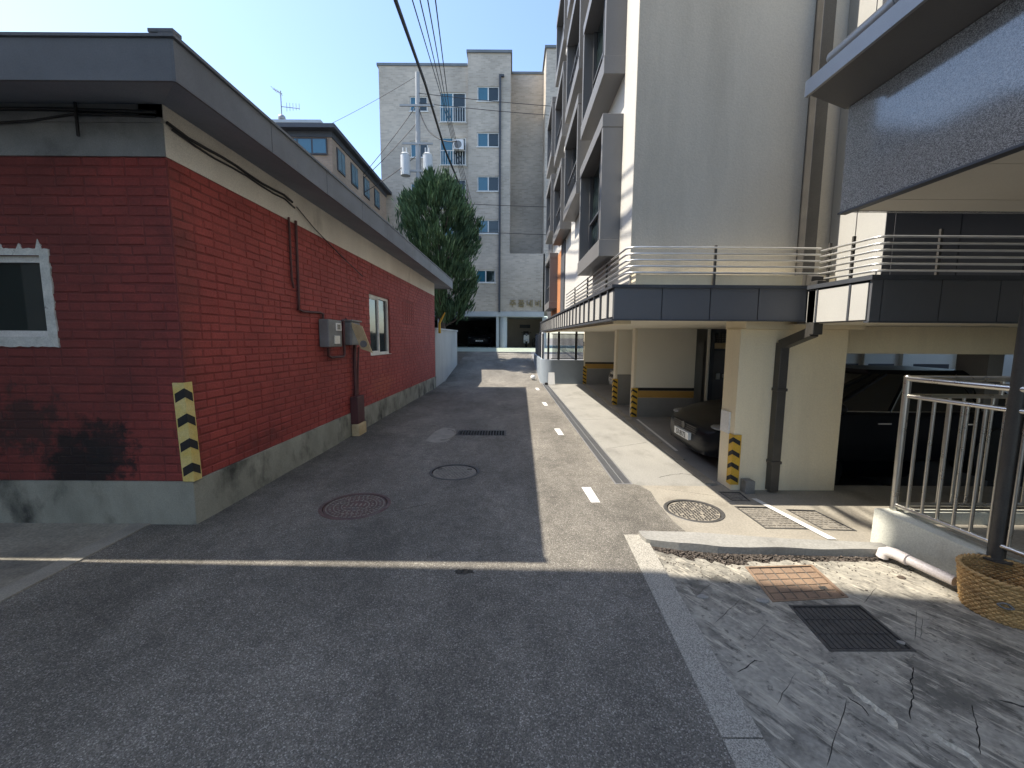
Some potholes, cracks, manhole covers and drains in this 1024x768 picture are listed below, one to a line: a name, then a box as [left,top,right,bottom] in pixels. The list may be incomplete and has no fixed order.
crack [810,666,1024,768]
manhole cover [318,493,391,520]
manhole cover [663,499,726,523]
manhole cover [429,464,480,480]
